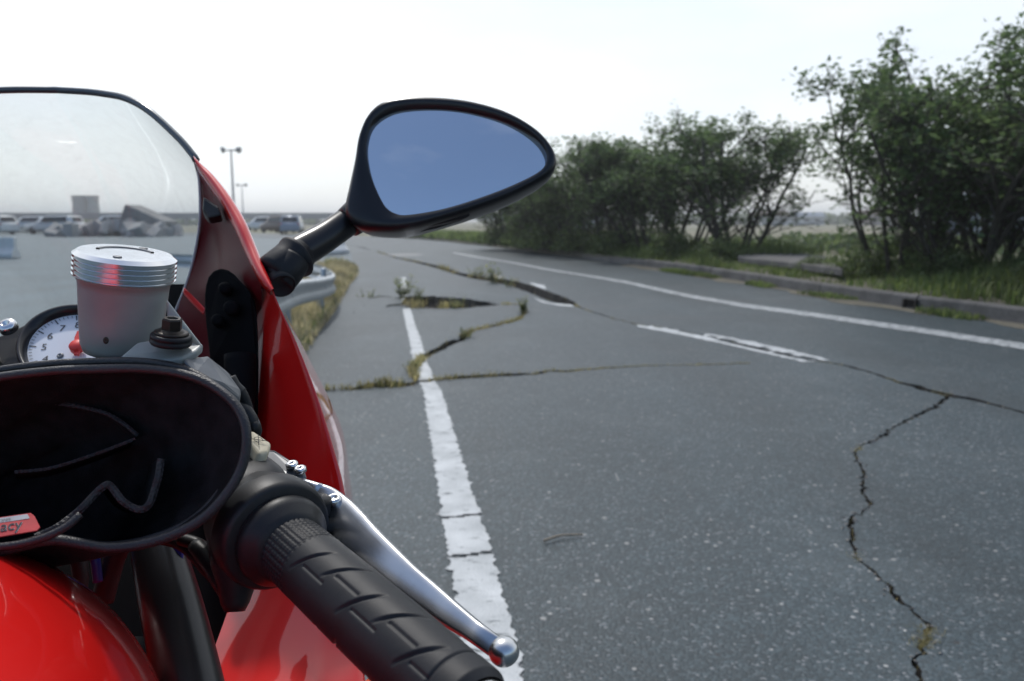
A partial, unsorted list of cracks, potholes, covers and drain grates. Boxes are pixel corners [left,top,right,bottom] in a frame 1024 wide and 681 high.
pothole [403,296,498,309]
crack [378,252,1024,681]
